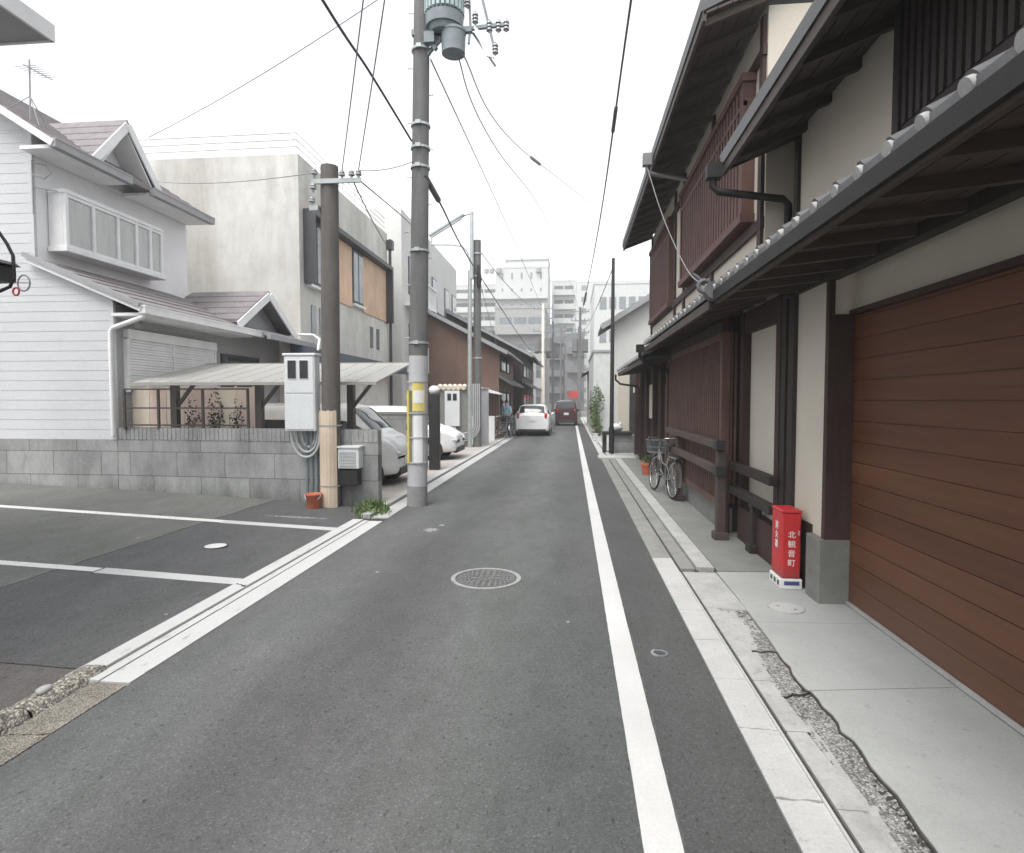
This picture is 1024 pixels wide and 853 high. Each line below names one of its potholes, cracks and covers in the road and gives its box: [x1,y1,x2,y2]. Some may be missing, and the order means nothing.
crack [751,650,937,853]
utility cover [651,649,668,657]
manhole cover [451,568,521,589]
manhole cover [767,602,806,615]
